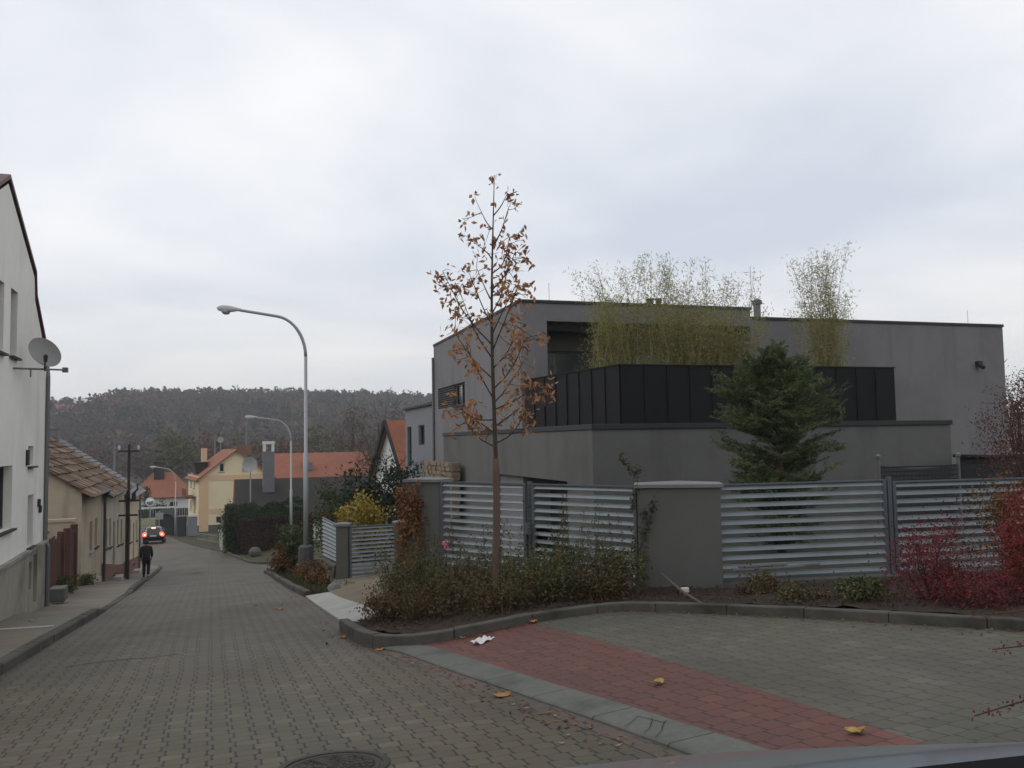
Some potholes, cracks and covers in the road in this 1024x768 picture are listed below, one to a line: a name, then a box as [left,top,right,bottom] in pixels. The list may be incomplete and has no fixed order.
manhole cover [278,750,390,768]
